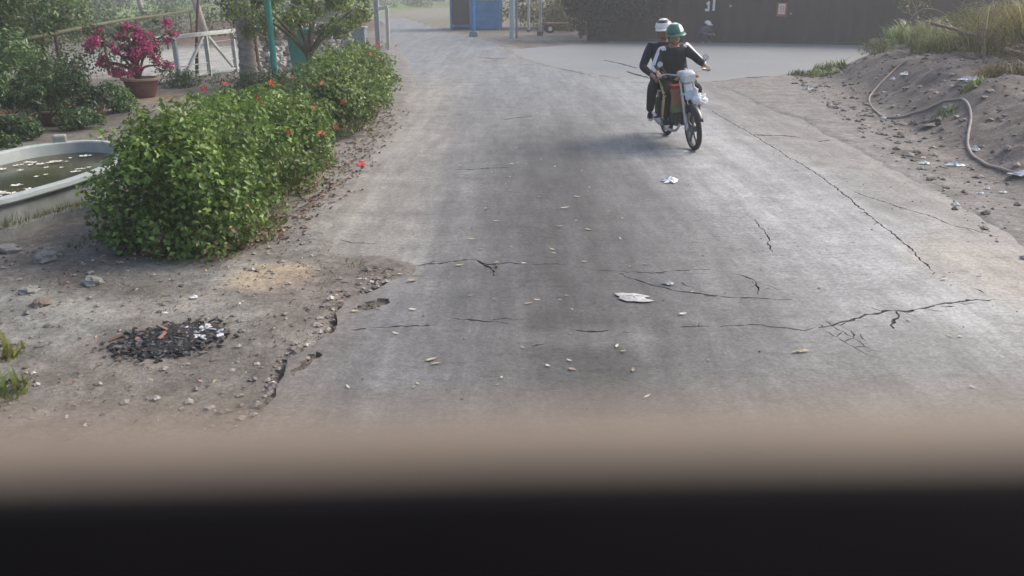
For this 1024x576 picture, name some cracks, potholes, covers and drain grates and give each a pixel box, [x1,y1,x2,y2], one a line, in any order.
crack [417,259,562,275]
crack [683,288,994,357]
crack [600,269,791,300]
crack [856,192,997,237]
pothole [290,351,323,376]
pothole [355,298,390,310]
